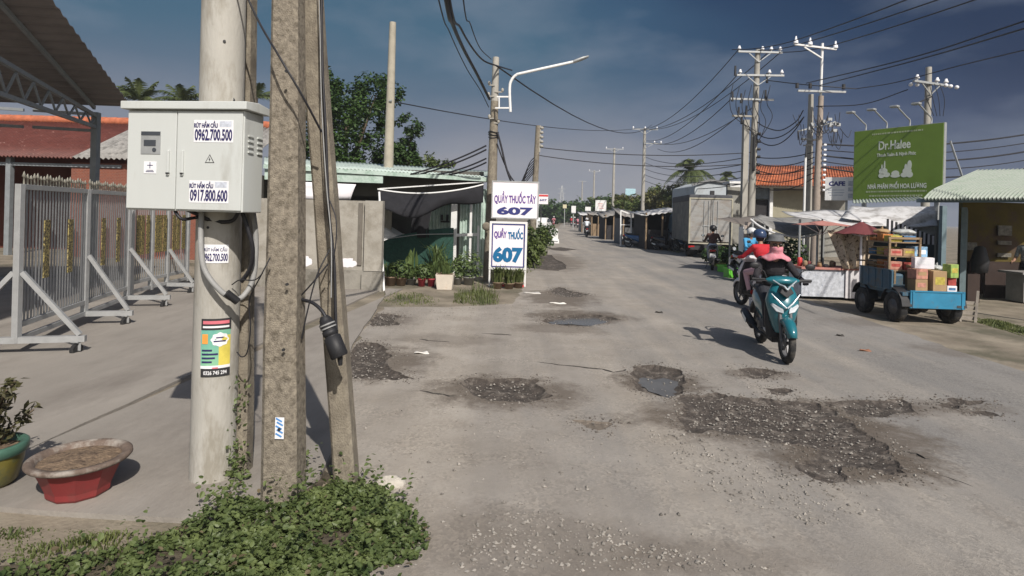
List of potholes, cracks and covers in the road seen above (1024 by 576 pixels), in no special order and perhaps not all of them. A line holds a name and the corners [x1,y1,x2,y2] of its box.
pothole [350,341,414,380]
crack [540,362,626,372]
pothole [629,364,686,398]
pothole [459,377,553,403]
pothole [370,313,401,326]
pothole [551,287,588,297]
pothole [573,420,613,430]
pothole [938,398,989,409]
pothole [676,392,905,483]
pothole [739,367,783,379]
pothole [526,254,566,271]
pothole [540,314,617,326]
